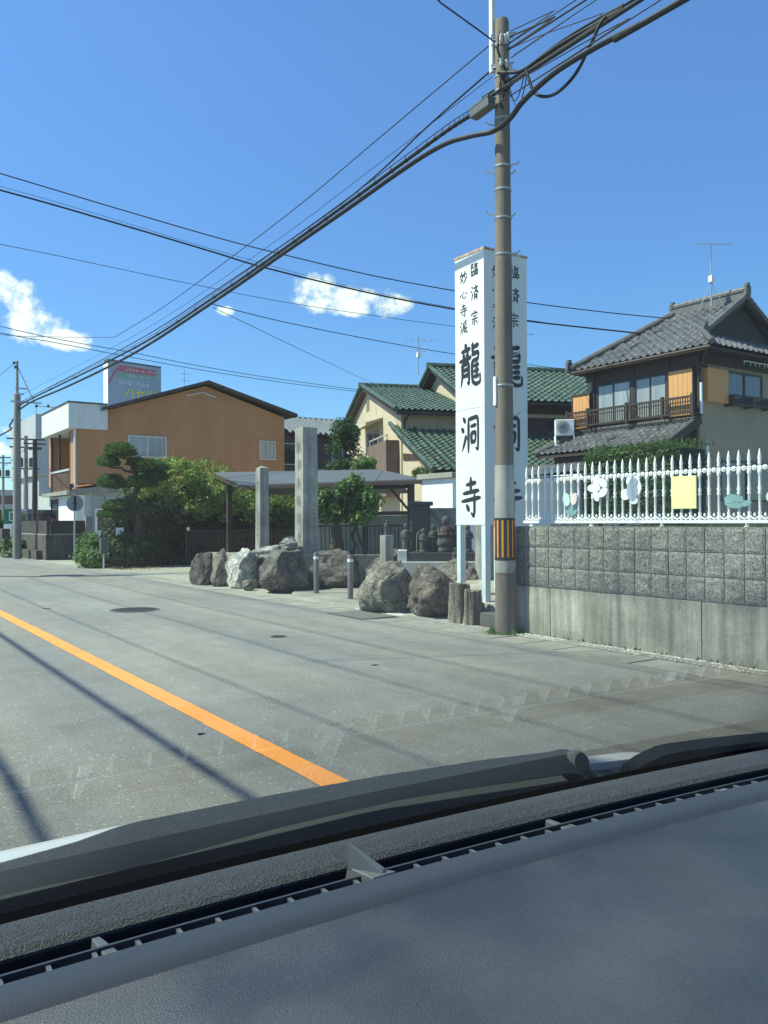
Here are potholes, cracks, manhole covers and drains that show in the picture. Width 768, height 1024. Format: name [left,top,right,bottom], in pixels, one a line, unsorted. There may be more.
drain grate [326,610,397,620]
